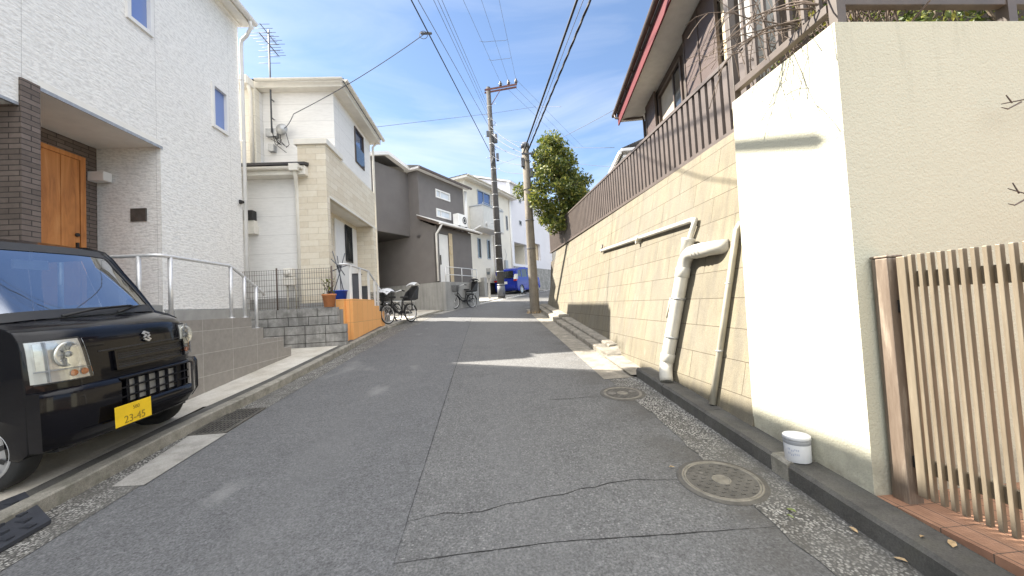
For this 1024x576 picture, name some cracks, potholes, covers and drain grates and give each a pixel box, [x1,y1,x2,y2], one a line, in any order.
crack [411,479,669,521]
drain grate [188,407,266,436]
manhole cover [600,386,646,401]
manhole cover [676,460,771,506]
